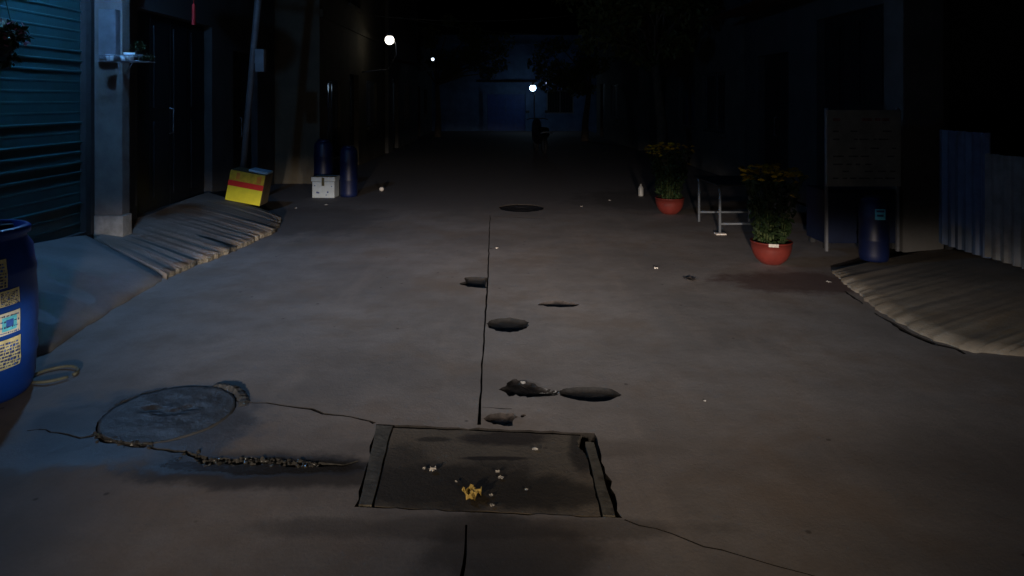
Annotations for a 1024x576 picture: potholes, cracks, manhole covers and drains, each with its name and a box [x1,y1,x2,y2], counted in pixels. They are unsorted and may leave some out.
crack [235,400,376,424]
pothole [483,413,517,426]
crack [625,519,814,576]
manhole cover [355,424,622,529]
pothole [499,379,559,398]
pothole [559,387,621,402]
crack [27,429,358,468]
manhole cover [95,382,250,448]
pothole [486,317,529,332]
pothole [460,277,488,288]
